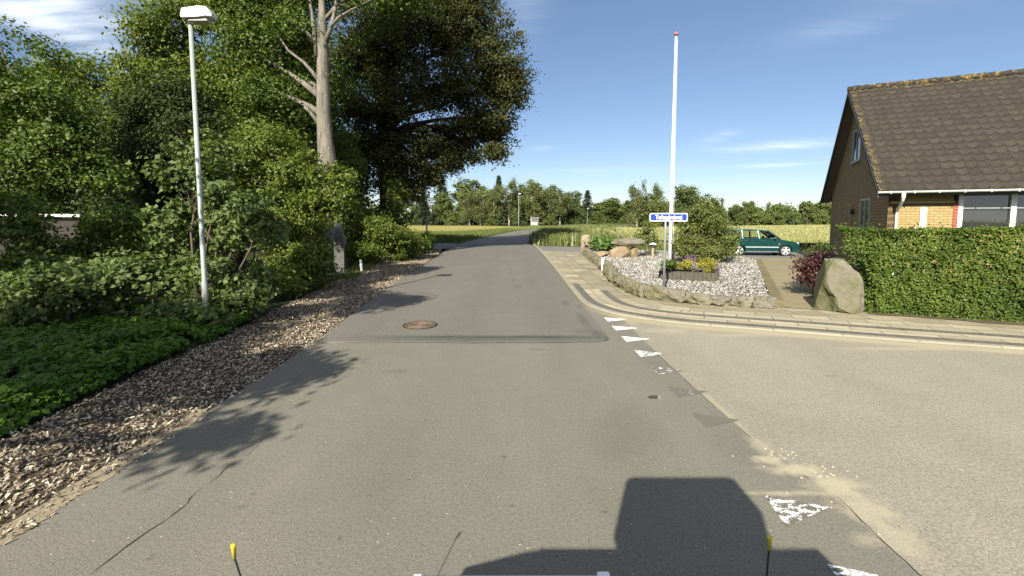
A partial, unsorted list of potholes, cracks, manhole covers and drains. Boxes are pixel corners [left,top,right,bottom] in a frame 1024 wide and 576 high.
crack [91,428,276,574]
manhole cover [402,321,438,329]
